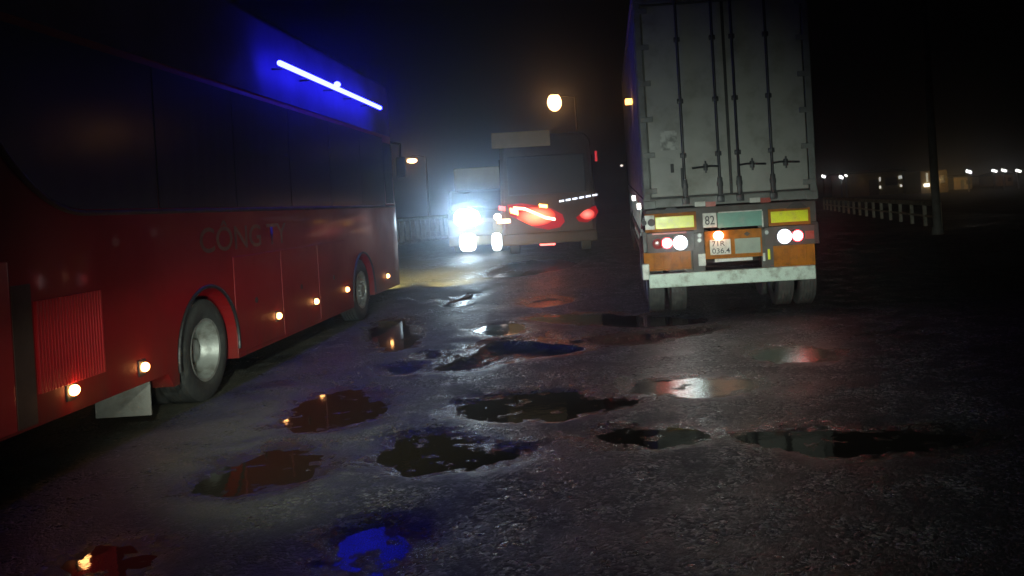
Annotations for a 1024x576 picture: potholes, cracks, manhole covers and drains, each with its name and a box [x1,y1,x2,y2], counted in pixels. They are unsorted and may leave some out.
pothole [730,429,975,459]
pothole [474,324,527,337]
pothole [192,450,324,497]
pothole [442,294,474,307]
pothole [628,378,754,398]
pothole [60,544,157,576]
pothole [319,527,412,576]
pothole [387,366,424,374]
pothole [456,392,639,424]
pothole [595,427,711,449]
pothole [434,341,585,371]
pothole [367,319,420,352]
